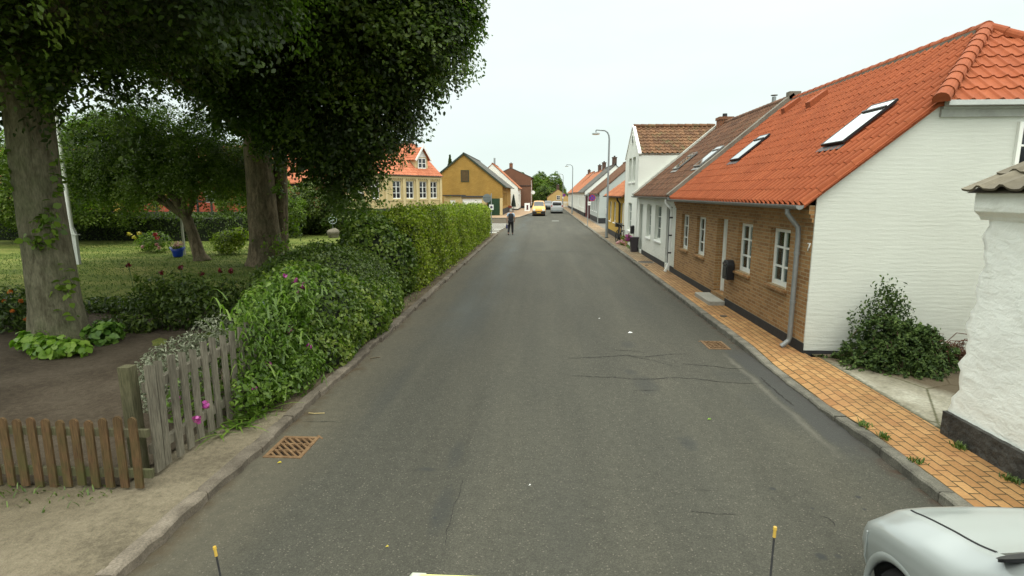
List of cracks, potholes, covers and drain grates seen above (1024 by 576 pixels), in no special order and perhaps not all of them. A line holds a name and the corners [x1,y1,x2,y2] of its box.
drain grate [262,435,323,459]
crack [583,349,751,391]
drain grate [698,340,731,350]
crack [445,480,463,544]
